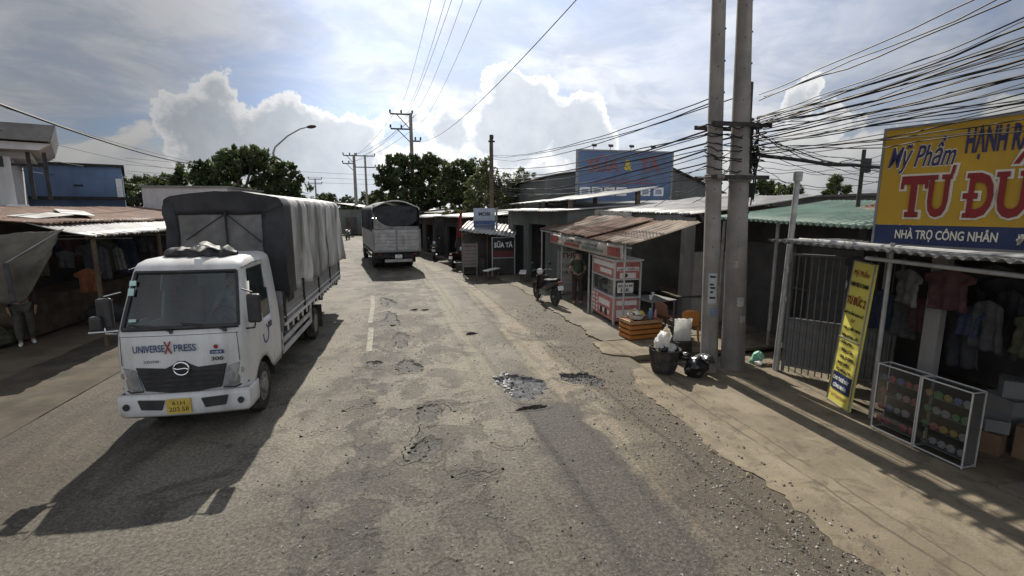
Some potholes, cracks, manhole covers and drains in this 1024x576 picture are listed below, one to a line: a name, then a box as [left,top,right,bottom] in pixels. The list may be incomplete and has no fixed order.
pothole [378,296,400,310]
pothole [391,358,428,374]
pothole [392,431,450,466]
pothole [390,330,413,352]
crack [451,438,535,479]
pothole [381,310,403,330]
pothole [363,359,386,370]
pothole [552,370,614,389]
pothole [487,370,555,404]
pothole [508,403,554,413]
pothole [412,401,447,427]
